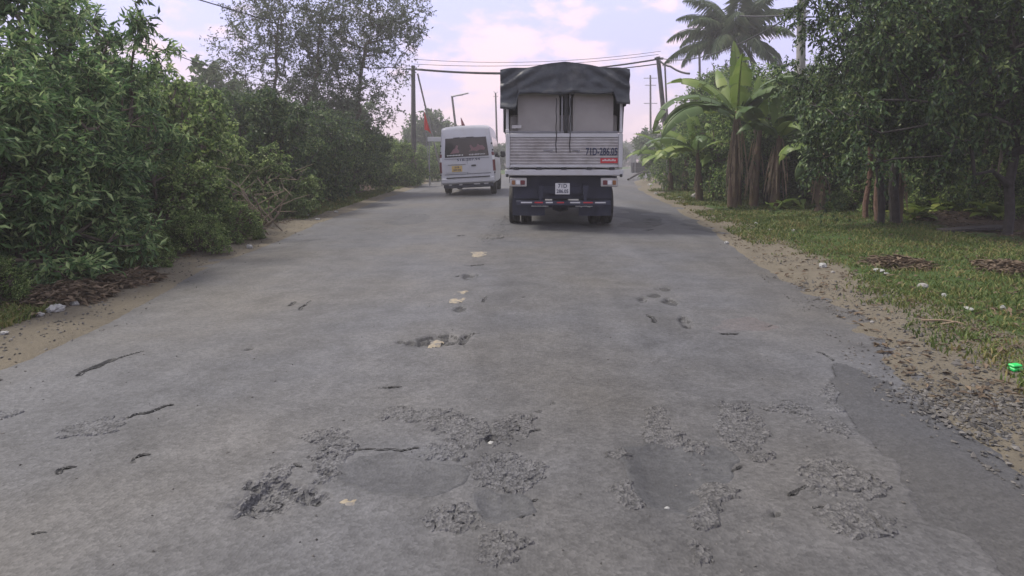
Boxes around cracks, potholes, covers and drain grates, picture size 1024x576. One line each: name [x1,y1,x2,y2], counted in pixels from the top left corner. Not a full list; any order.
pothole [231,482,333,524]
crack [75,351,143,376]
crack [126,404,174,418]
pothole [416,335,458,348]
